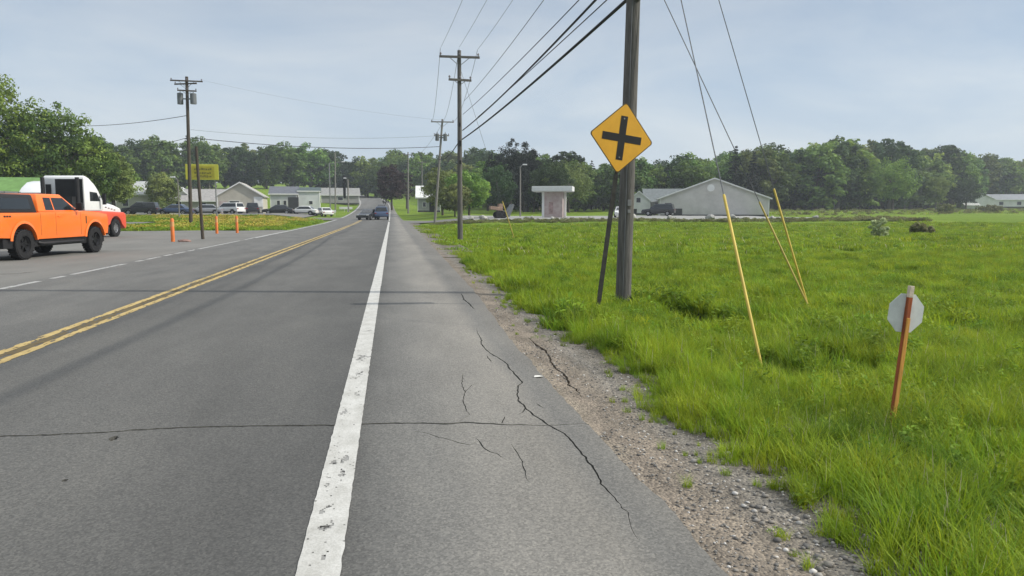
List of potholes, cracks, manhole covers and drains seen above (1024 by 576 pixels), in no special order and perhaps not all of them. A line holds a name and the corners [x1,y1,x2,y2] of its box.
crack [0,331,635,535]
